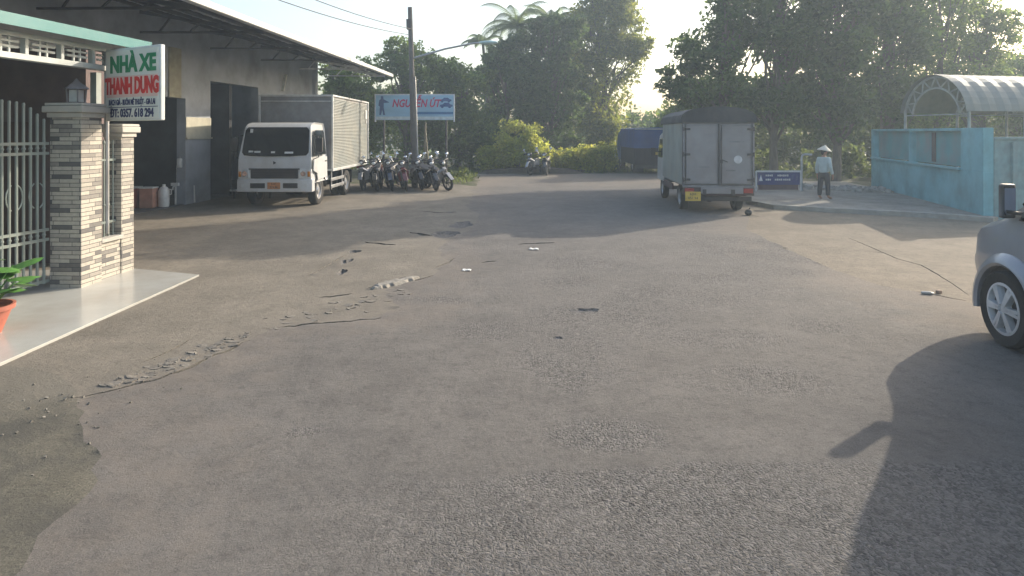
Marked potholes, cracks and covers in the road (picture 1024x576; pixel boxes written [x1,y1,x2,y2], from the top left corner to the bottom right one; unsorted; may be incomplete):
crack [366,232,432,245]
crack [852,239,967,301]
pothole [449,221,473,229]
crack [284,318,379,327]
crack [75,338,249,398]
